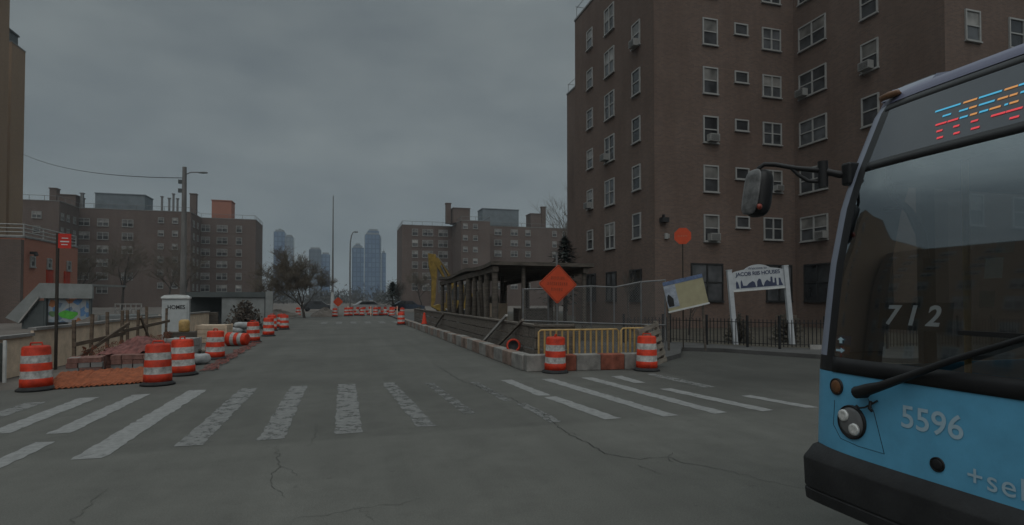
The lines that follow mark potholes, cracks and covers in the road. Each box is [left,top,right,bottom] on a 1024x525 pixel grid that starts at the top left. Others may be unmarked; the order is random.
crack [437,366,800,488]
